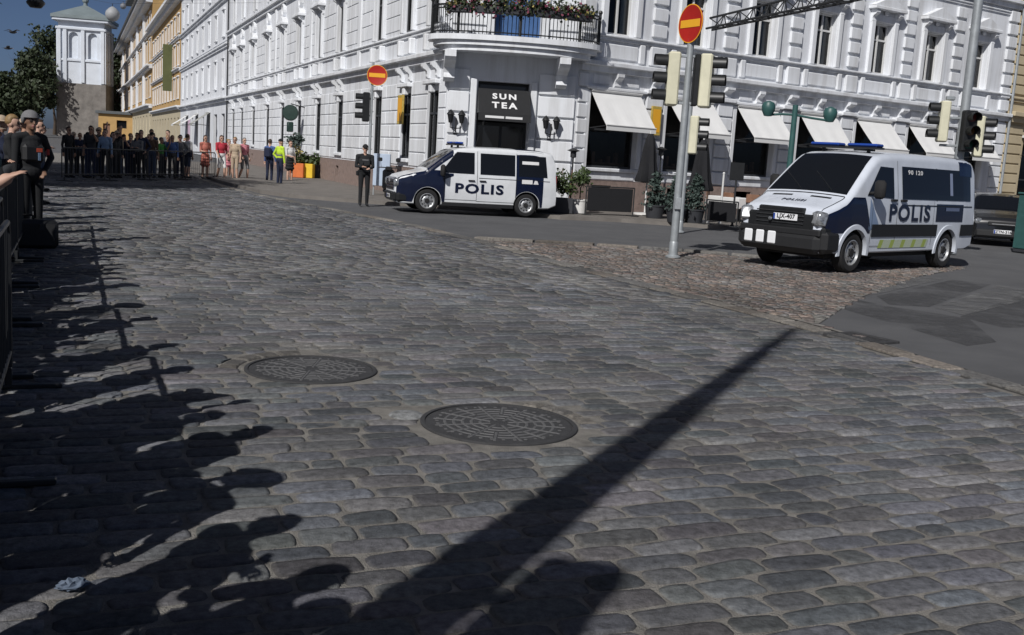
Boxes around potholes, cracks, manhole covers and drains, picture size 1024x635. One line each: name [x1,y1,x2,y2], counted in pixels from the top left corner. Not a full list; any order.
manhole cover [420,403,578,446]
manhole cover [244,355,377,385]
